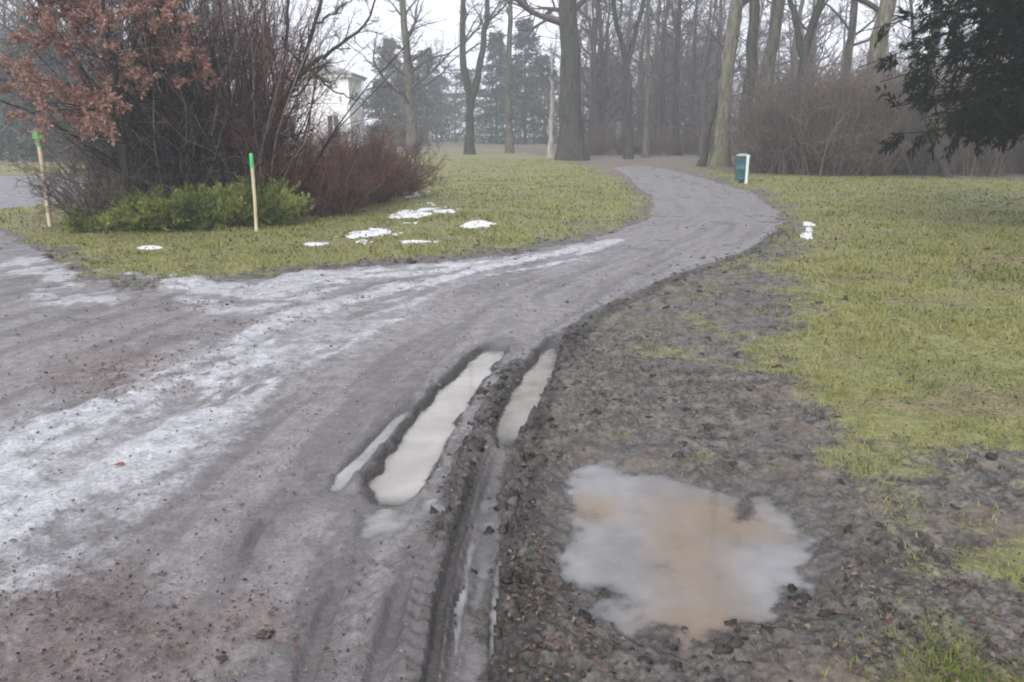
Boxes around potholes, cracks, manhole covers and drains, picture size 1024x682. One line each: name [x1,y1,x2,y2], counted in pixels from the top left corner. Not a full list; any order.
pothole [533,448,850,682]
